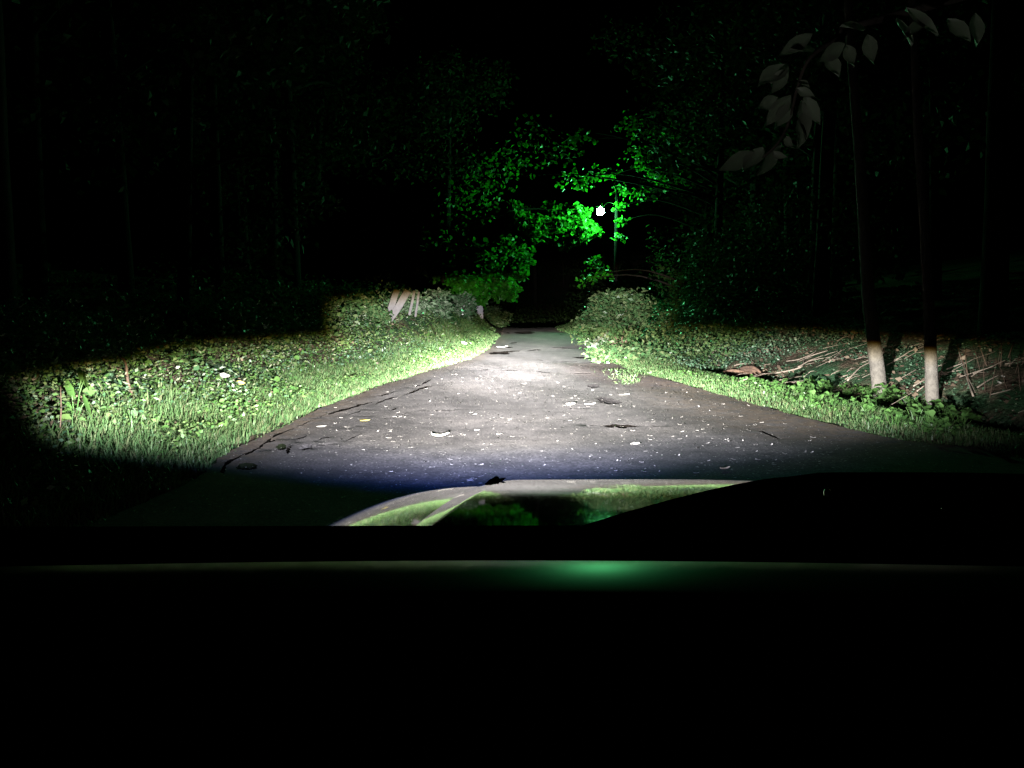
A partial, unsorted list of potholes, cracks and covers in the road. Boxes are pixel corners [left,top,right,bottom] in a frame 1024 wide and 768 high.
crack [220,380,449,474]
